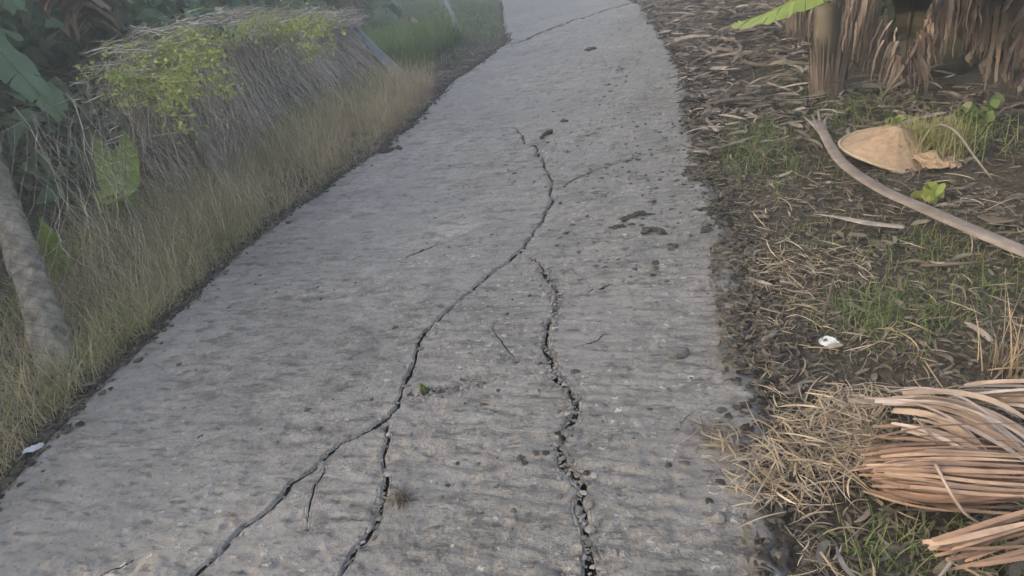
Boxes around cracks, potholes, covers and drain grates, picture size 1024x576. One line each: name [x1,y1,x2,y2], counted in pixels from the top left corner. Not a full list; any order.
crack [187,126,692,576]
crack [511,0,638,45]
